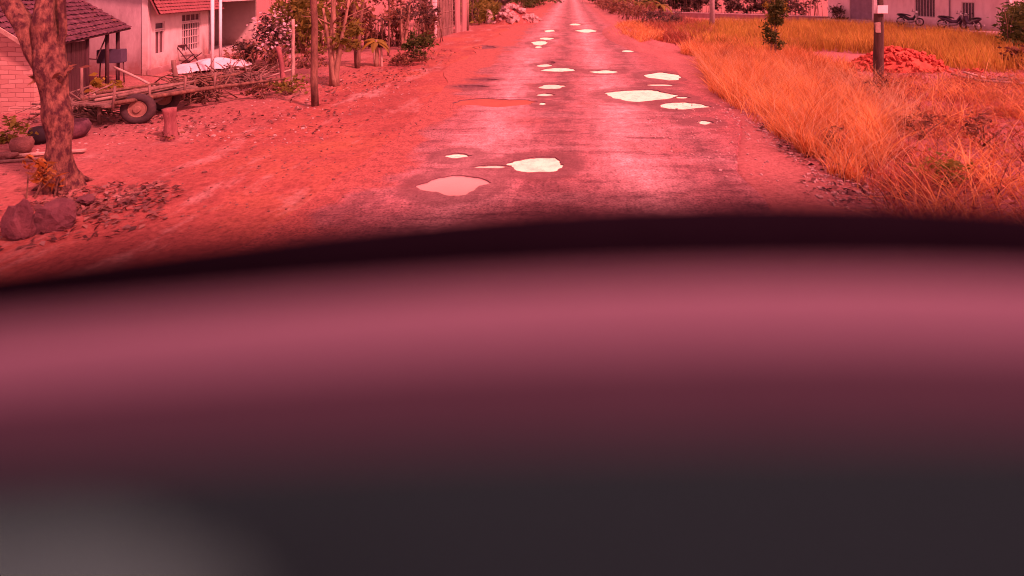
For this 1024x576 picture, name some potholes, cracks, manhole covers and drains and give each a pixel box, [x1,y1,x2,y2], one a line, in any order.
pothole [415,175,491,196]
pothole [506,156,564,172]
pothole [604,89,678,102]
pothole [643,72,681,80]
pothole [453,98,538,107]
